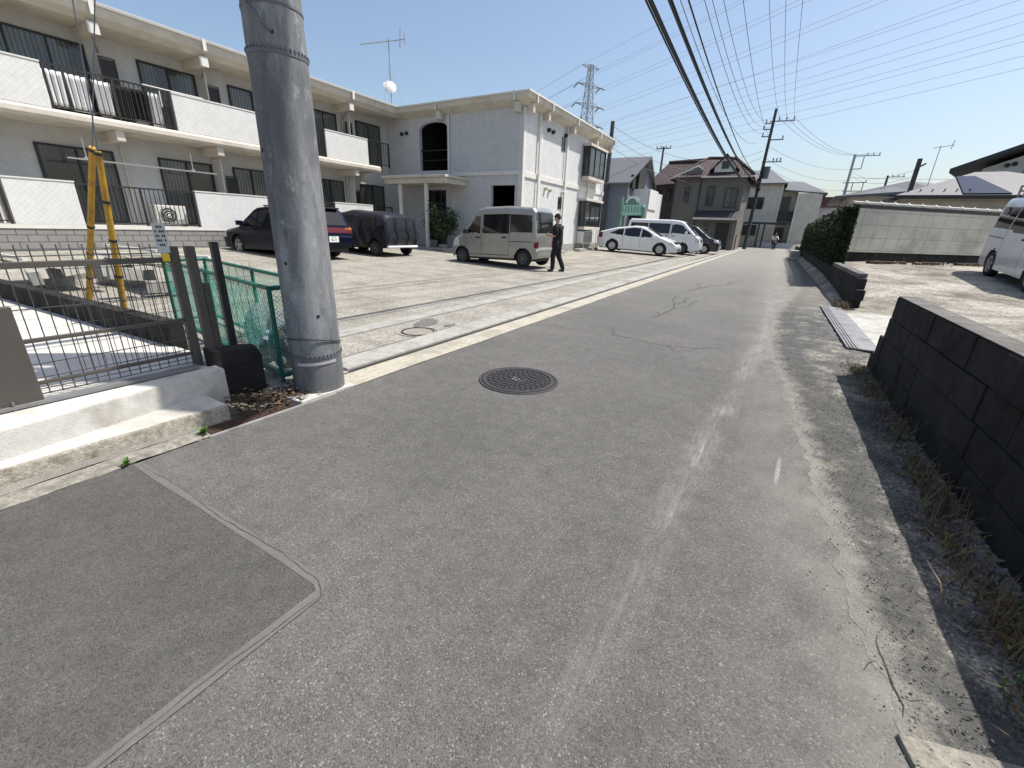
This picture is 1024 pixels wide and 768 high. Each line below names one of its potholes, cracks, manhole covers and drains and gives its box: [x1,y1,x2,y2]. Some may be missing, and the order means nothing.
crack [864,634,922,718]
manhole cover [479,367,558,395]
crack [650,281,740,319]
manhole cover [396,327,439,337]
